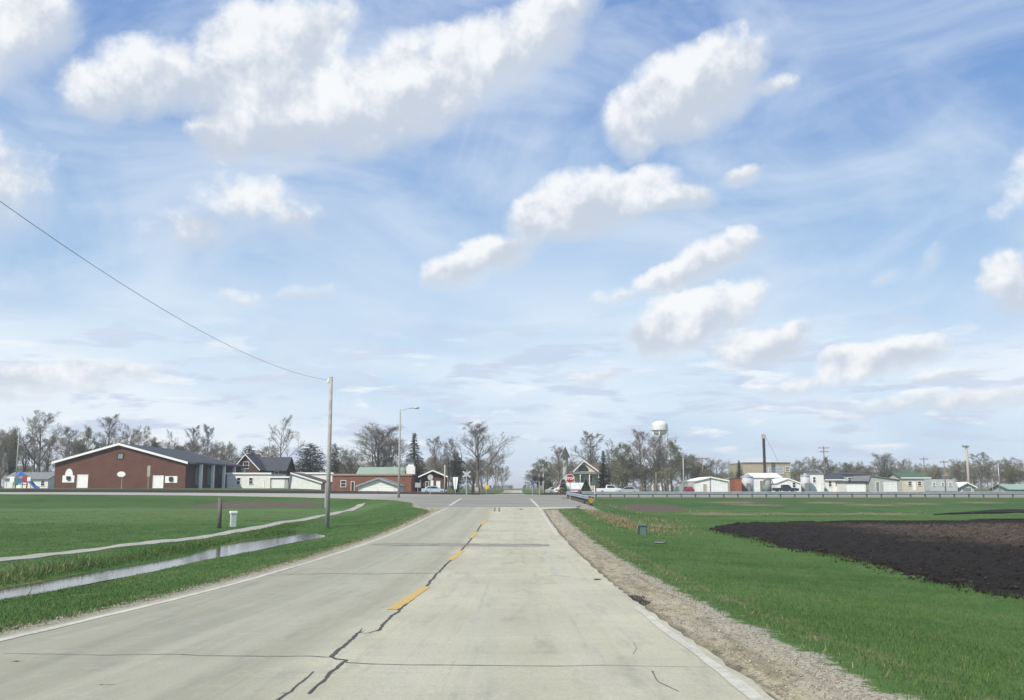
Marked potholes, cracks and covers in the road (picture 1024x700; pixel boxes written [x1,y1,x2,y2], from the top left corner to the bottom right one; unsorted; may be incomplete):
crack [21,507,686,700]
